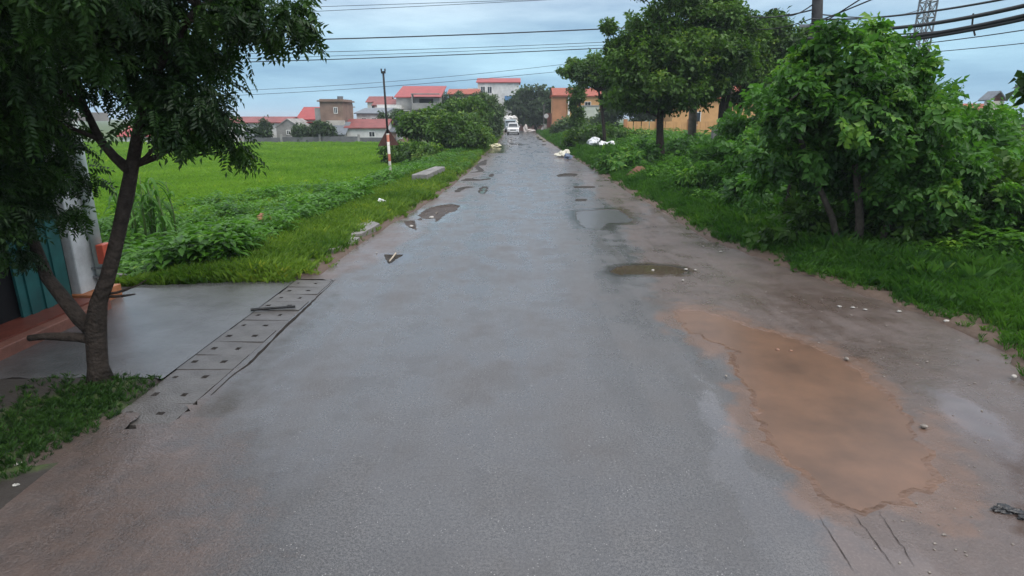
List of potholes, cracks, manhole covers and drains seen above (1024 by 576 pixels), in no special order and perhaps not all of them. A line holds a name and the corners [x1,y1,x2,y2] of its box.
pothole [417,204,460,222]
pothole [671,308,947,517]
